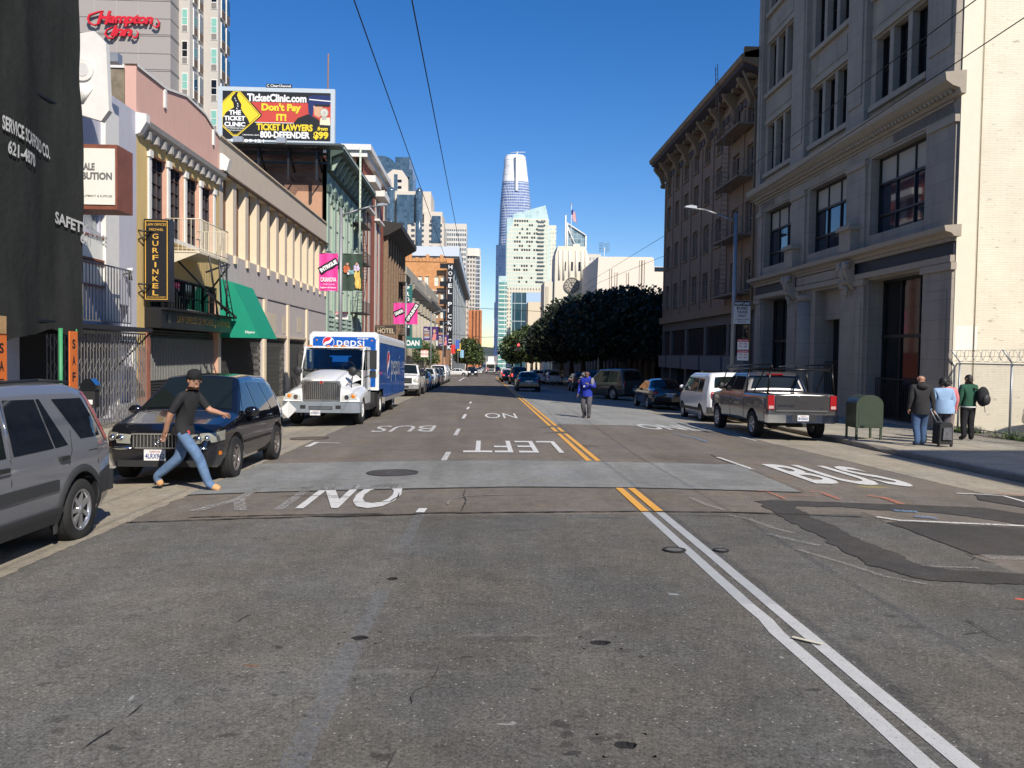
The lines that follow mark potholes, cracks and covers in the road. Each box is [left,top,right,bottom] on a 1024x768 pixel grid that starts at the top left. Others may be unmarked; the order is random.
crack [387,666,439,768]
